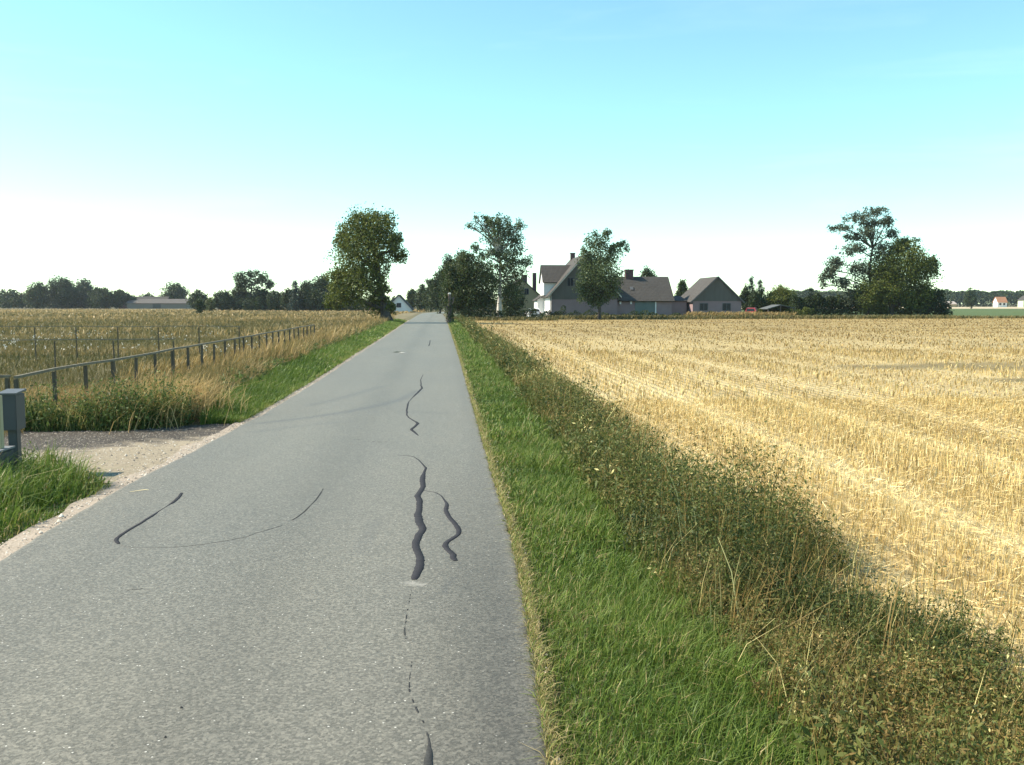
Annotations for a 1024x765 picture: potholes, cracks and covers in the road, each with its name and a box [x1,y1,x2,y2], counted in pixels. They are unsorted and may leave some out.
crack [408,661,433,765]
